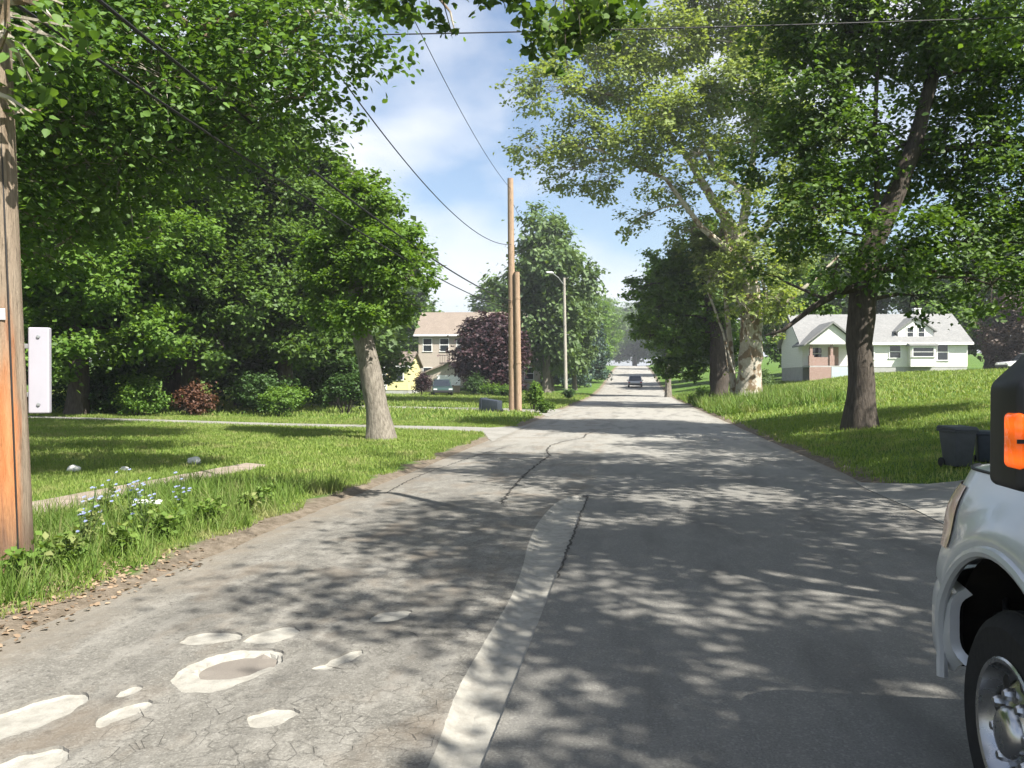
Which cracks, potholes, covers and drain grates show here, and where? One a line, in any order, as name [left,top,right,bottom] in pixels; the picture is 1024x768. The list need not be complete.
pothole [169,648,284,693]
pothole [0,691,89,740]
pothole [368,609,412,622]
pothole [0,746,70,768]
pothole [242,626,301,644]
pothole [95,699,153,728]
crack [263,625,483,766]
pothole [311,649,363,670]
pothole [246,707,300,728]
pothole [115,685,143,697]
pothole [179,631,242,645]
crack [84,696,249,768]
